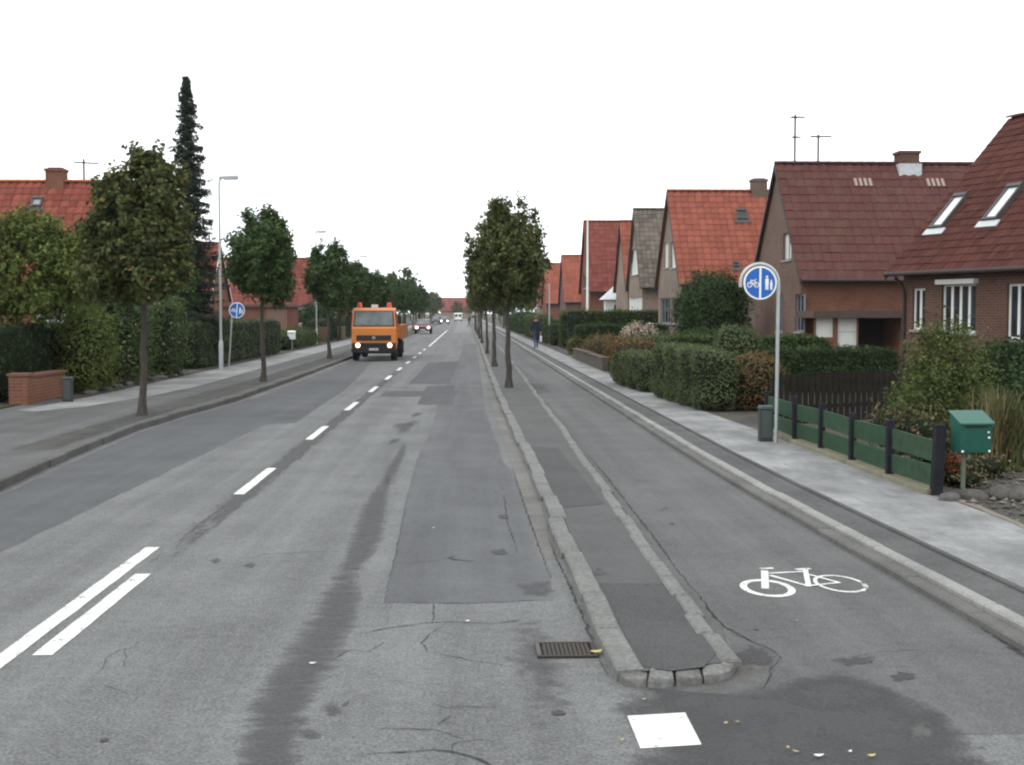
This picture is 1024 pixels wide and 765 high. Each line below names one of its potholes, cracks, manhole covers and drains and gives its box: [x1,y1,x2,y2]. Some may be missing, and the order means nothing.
crack [337,618,524,664]
crack [503,469,606,670]
crack [699,595,782,689]
crack [351,680,492,765]
